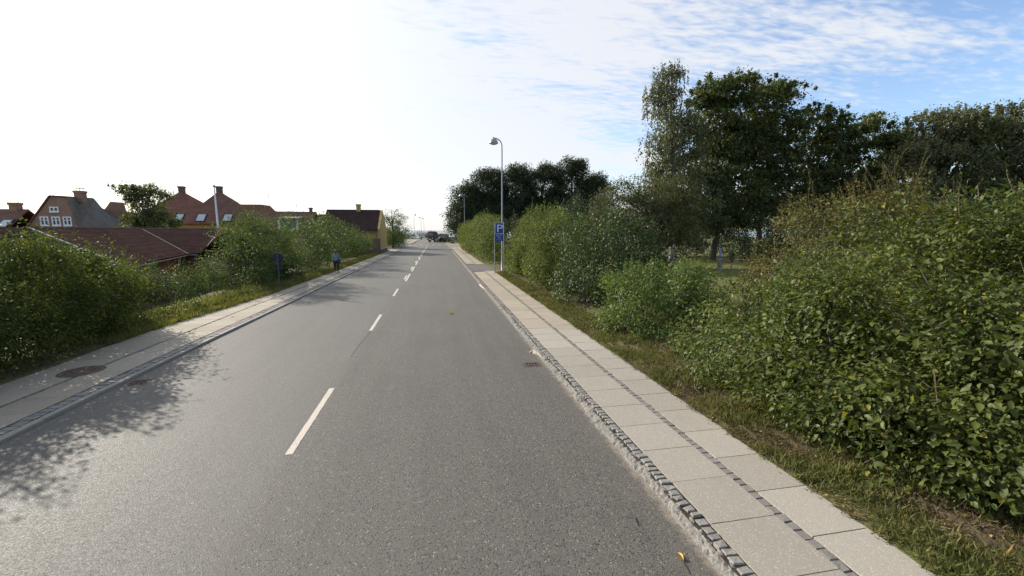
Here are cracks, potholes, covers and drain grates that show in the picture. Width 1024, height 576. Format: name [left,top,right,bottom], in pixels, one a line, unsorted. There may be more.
manhole cover [56,365,107,378]
